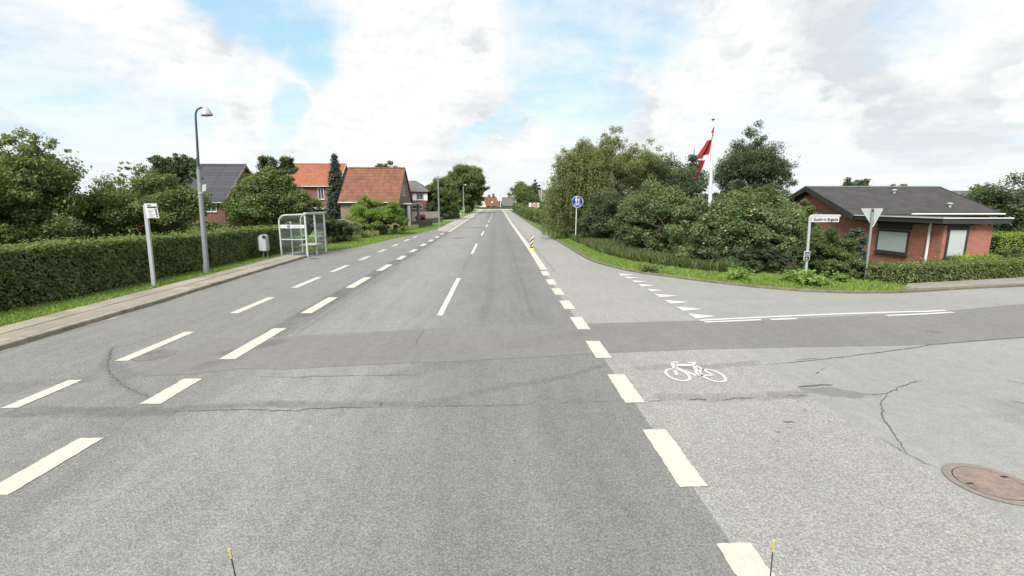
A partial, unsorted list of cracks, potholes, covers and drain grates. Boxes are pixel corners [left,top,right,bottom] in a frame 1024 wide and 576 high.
crack [656,337,1019,401]
manhole cover [127,348,182,363]
crack [856,381,928,464]
crack [105,346,155,398]
manhole cover [942,463,1024,505]
